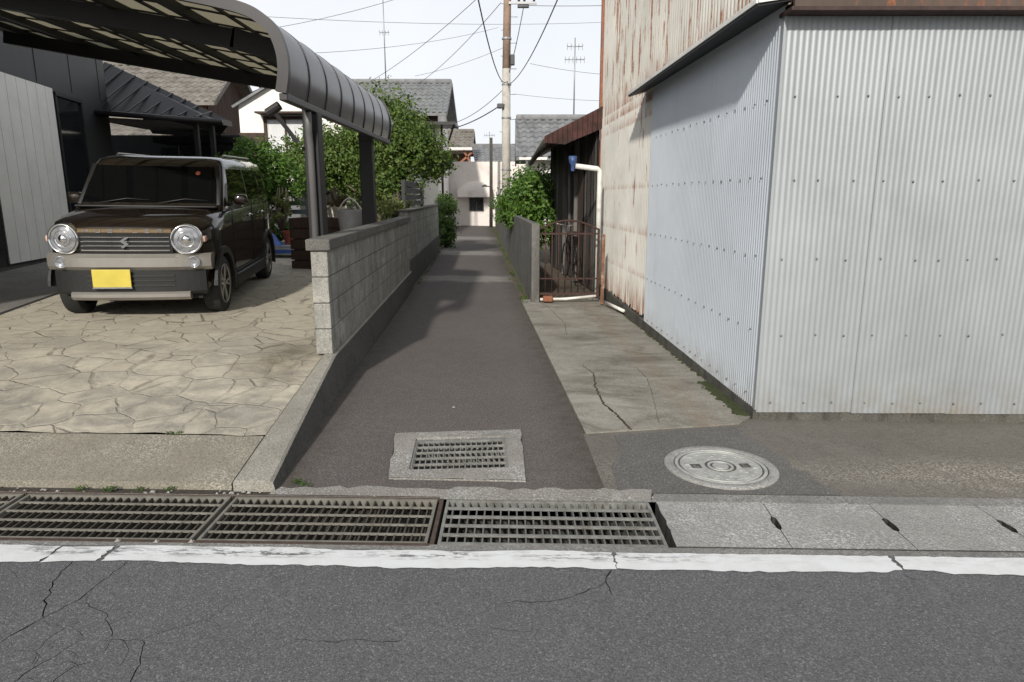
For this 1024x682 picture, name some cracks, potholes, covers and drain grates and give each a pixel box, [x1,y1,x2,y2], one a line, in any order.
drain grate [193,494,440,546]
crack [584,366,660,430]
drain grate [437,499,668,548]
crack [0,561,231,682]
drain grate [0,491,29,511]
manhole cover [664,446,779,490]
crack [501,569,612,604]
